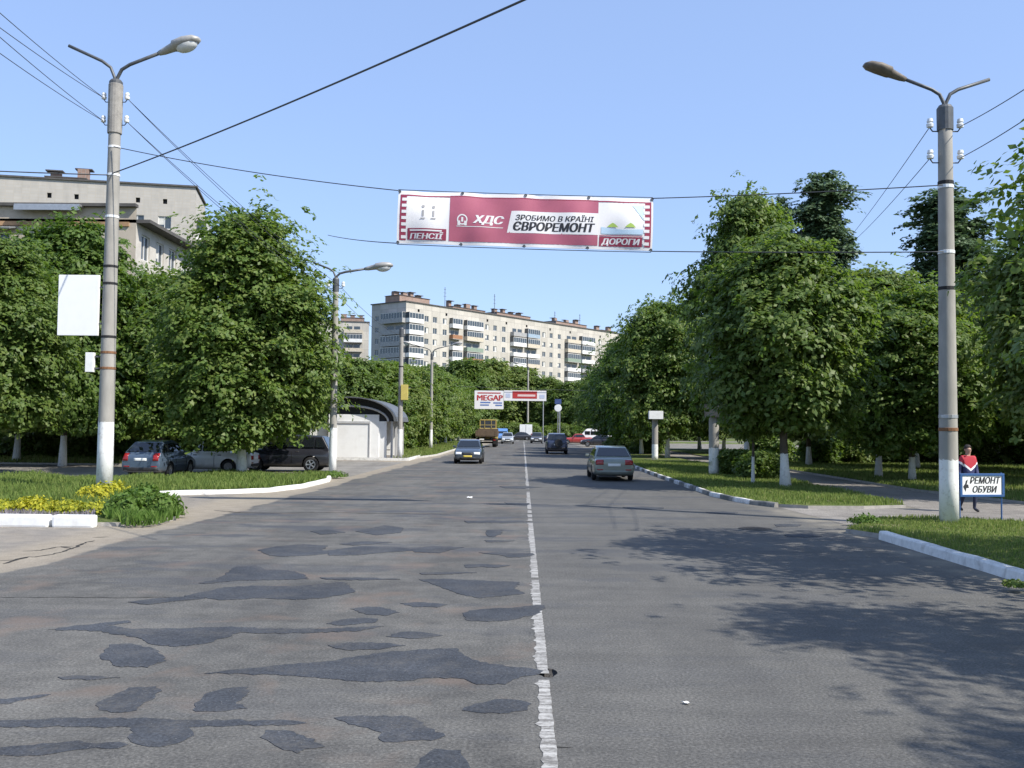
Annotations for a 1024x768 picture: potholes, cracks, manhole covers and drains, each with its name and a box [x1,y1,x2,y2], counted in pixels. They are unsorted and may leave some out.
crack [0,541,92,564]
